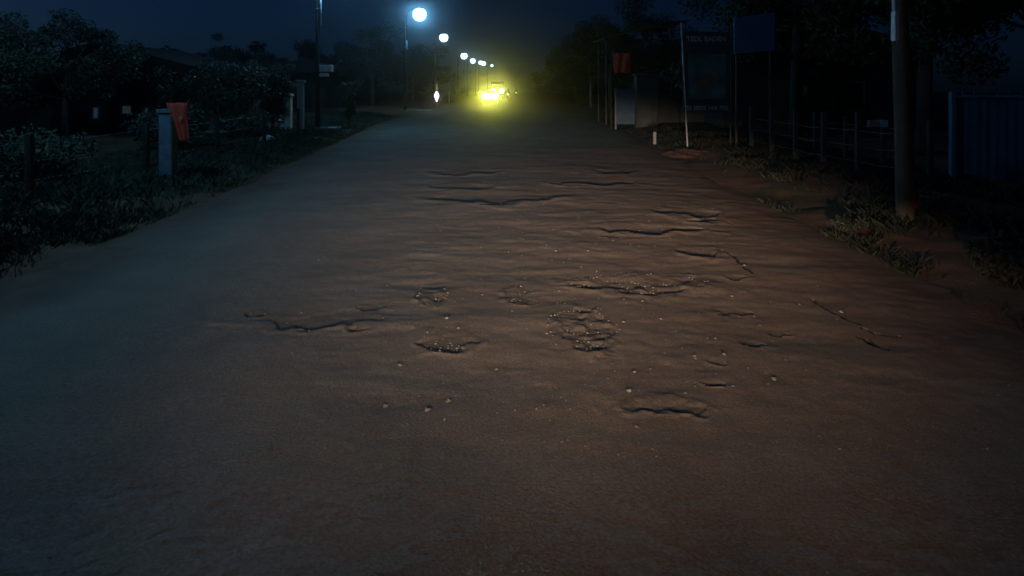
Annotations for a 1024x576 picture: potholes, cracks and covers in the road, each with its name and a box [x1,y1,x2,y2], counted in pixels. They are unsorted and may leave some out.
crack [811,299,901,350]
pothole [612,391,710,418]
pothole [547,304,619,361]
pothole [416,322,484,354]
crack [719,250,754,274]
pothole [497,285,536,307]
pothole [551,272,721,297]
pothole [413,288,447,308]
